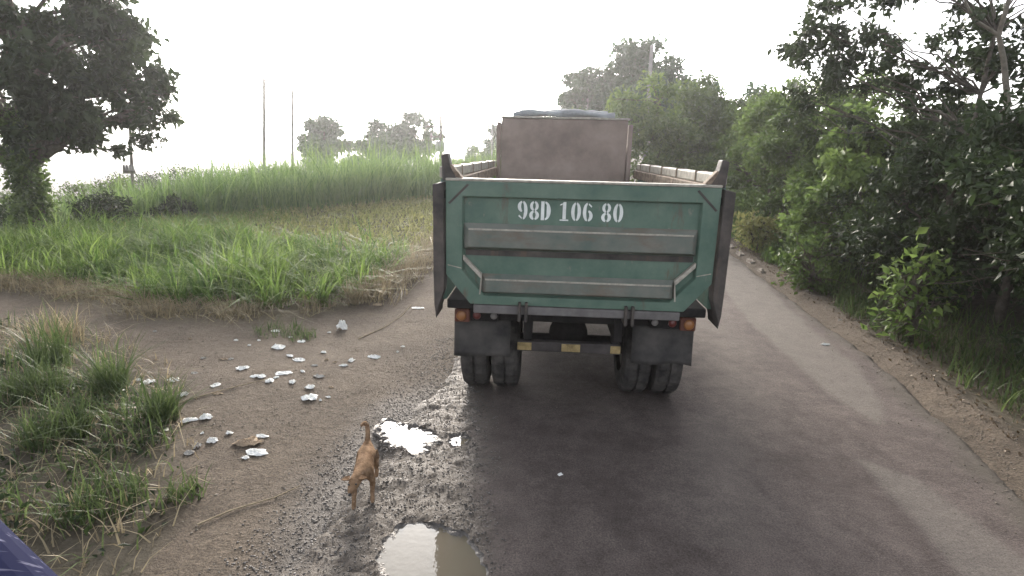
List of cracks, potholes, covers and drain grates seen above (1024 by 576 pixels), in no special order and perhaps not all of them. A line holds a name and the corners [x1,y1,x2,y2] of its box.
pothole [447,432,472,447]
pothole [375,521,489,576]
pothole [372,417,444,457]
